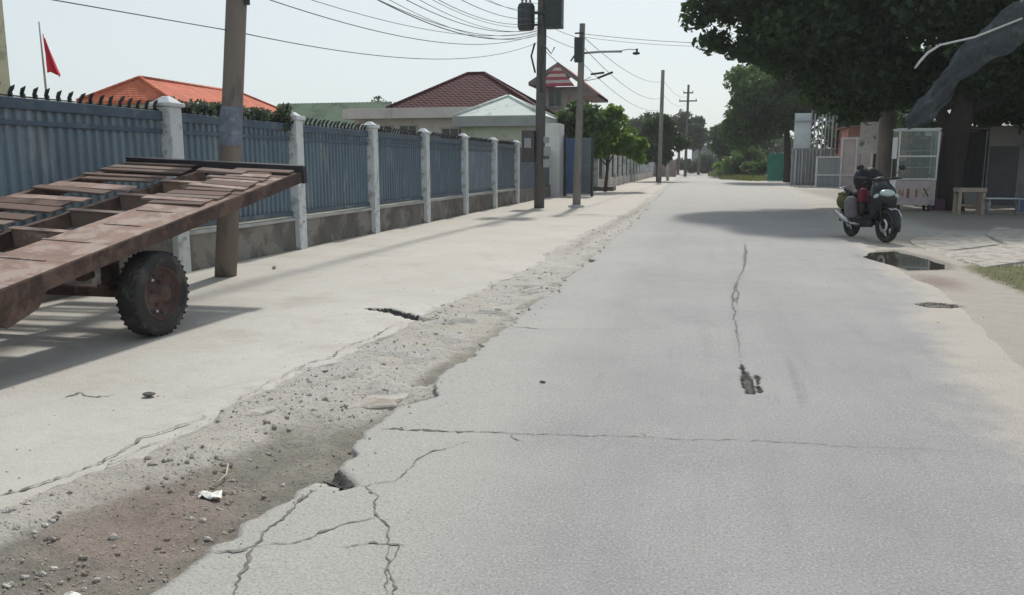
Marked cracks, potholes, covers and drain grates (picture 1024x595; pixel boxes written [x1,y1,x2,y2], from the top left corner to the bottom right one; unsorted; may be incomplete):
crack [215,427,983,595]
pothole [740,364,763,395]
pothole [323,470,355,490]
crack [731,245,748,358]
